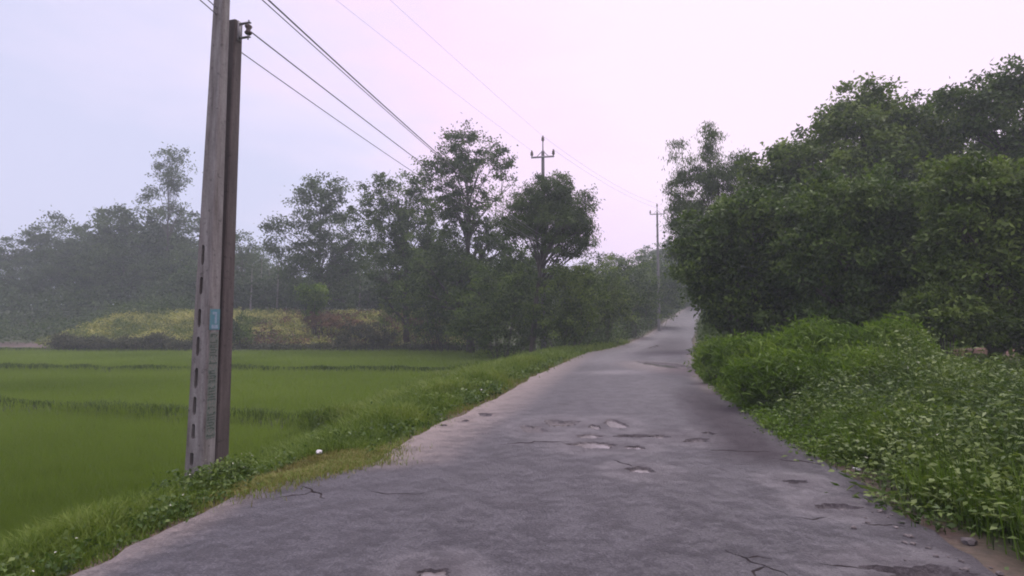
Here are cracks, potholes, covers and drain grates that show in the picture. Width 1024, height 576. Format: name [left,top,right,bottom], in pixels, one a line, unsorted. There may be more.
crack [276,486,322,498]
pothole [415,568,452,576]
pothole [603,419,629,429]
crack [726,550,787,576]
pothole [544,419,581,427]
